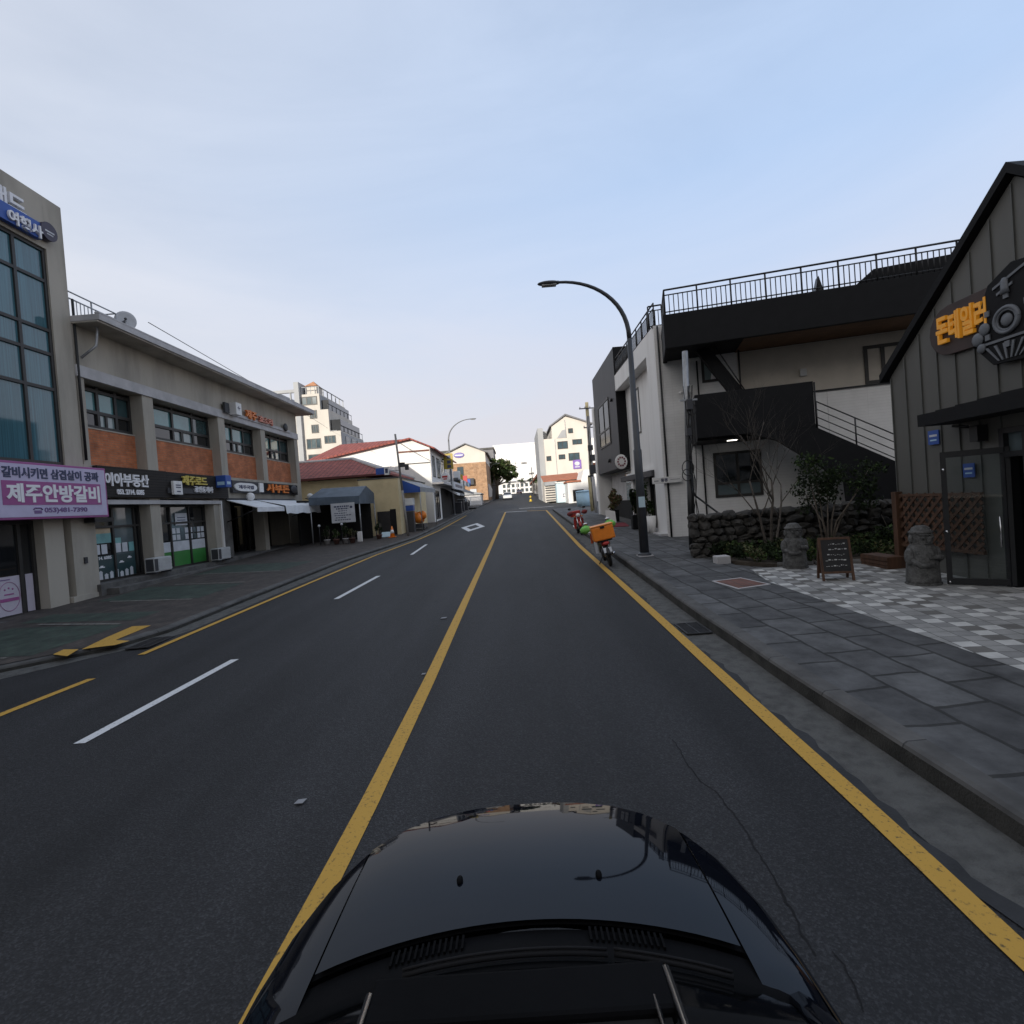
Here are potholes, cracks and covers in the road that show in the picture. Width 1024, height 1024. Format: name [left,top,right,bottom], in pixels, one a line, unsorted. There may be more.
crack [672,739,863,1011]
manhole cover [712,577,771,589]
drain grate [674,622,713,635]
